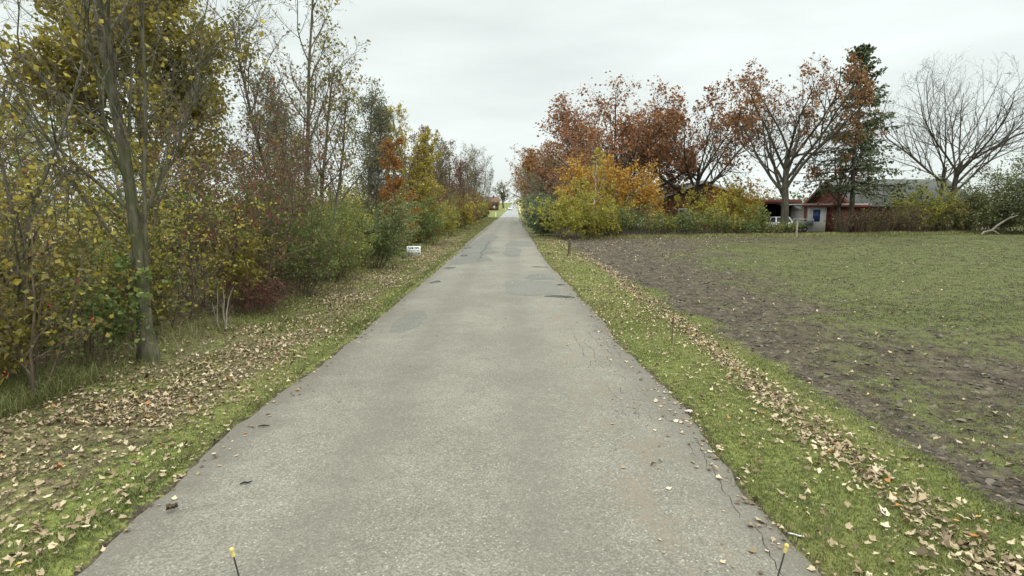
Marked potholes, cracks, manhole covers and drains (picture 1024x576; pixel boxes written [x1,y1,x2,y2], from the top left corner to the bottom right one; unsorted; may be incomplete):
crack [687,439,783,576]
crack [570,330,674,422]
